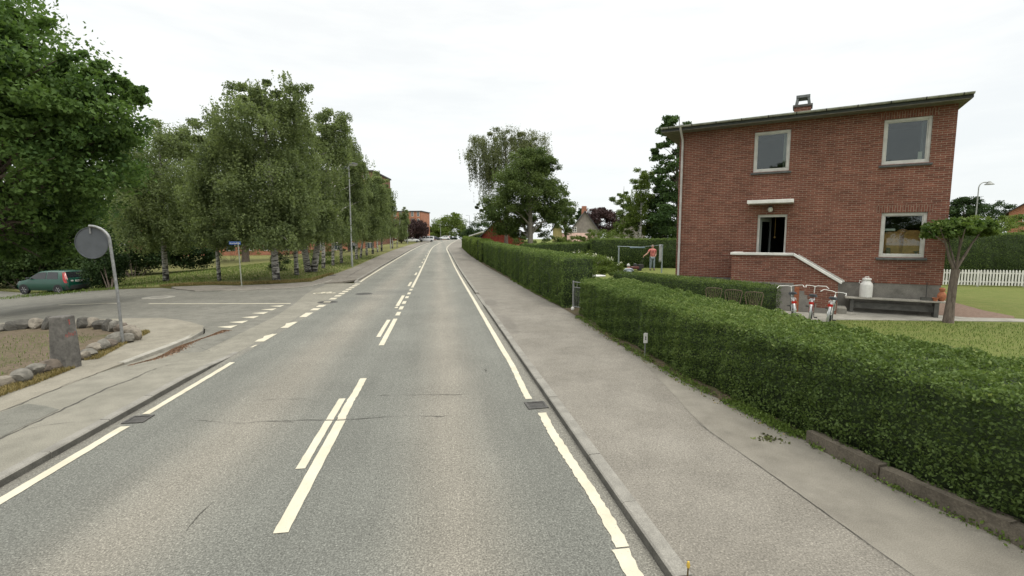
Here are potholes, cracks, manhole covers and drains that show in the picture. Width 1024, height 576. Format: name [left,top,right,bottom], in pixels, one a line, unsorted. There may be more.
drain grate [121,415,155,424]
crack [248,415,452,423]
drain grate [524,401,549,410]
